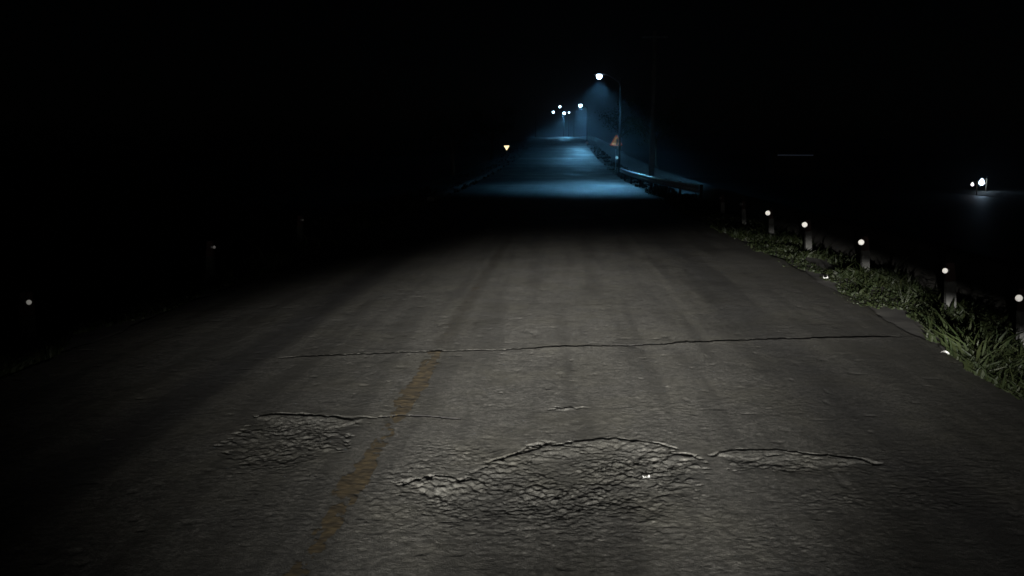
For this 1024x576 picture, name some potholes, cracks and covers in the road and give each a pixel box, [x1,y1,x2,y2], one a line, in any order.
crack [507,339,767,350]
pothole [391,437,714,529]
